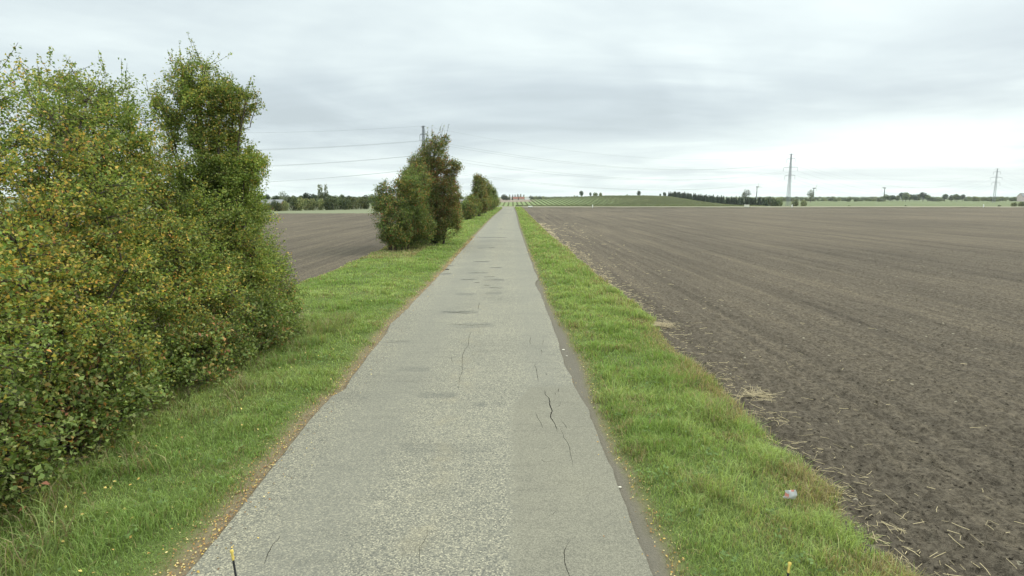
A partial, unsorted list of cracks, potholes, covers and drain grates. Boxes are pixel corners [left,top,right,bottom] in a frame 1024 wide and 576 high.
crack [530,338,573,464]
